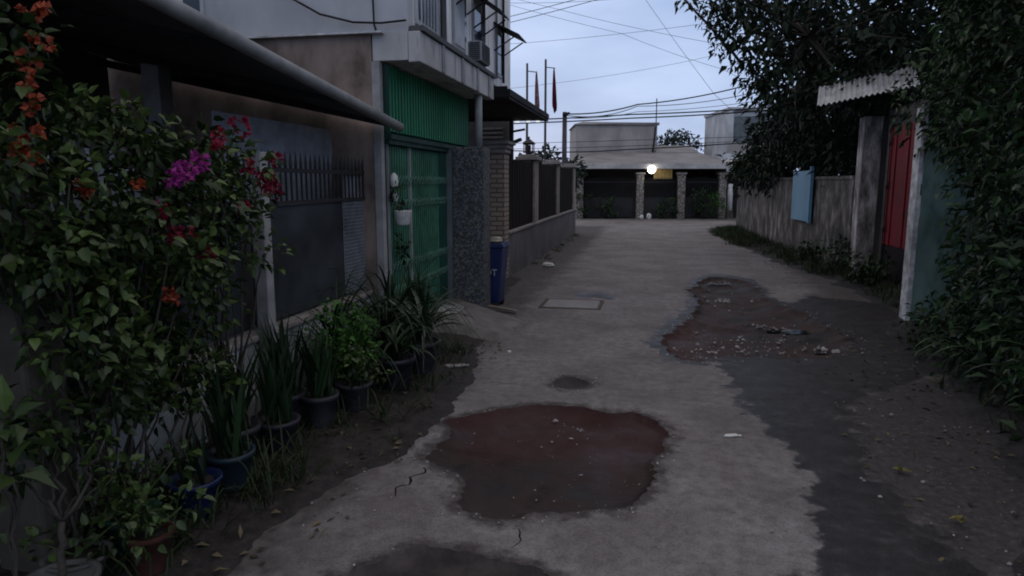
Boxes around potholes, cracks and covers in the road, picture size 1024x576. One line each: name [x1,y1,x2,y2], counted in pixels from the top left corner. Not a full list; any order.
pothole [659,277,856,362]
manhole cover [538,298,604,310]
pothole [553,377,589,389]
pothole [351,545,549,576]
pothole [425,405,670,519]
crack [395,468,427,496]
